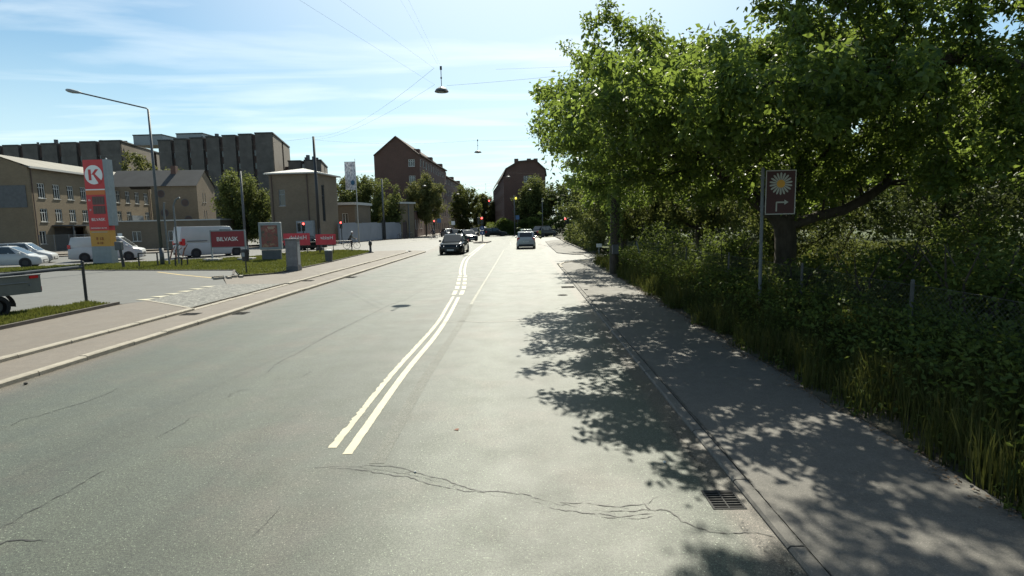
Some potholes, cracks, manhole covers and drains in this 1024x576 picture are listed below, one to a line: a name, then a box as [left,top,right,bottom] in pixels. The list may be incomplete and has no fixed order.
drain grate [701,490,747,510]
crack [315,465,775,537]
